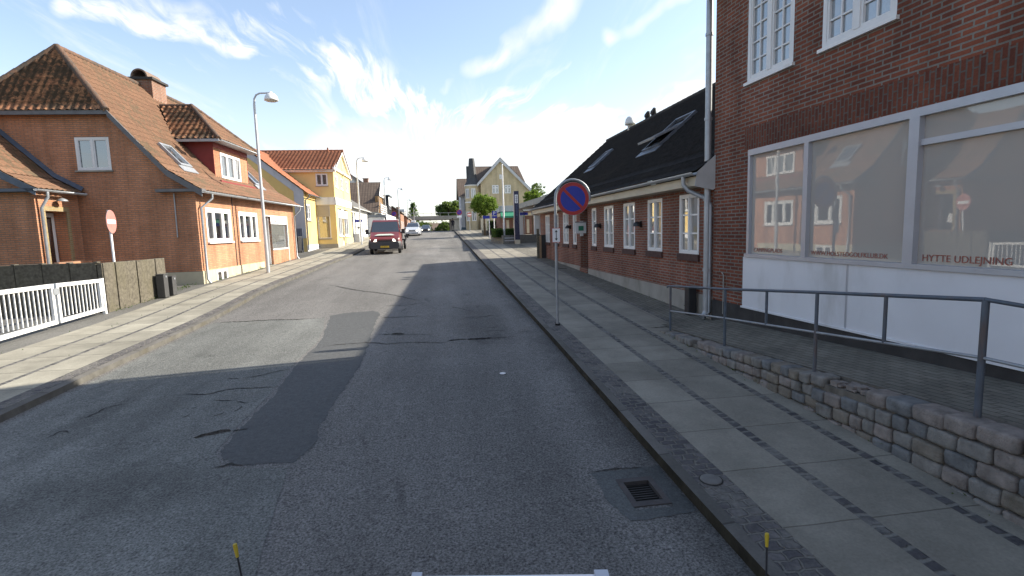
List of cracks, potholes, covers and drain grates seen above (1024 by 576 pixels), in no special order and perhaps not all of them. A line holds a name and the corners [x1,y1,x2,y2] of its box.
drain grate [615,476,672,508]
manhole cover [699,474,723,486]
crack [328,306,504,346]
crack [184,370,282,431]
